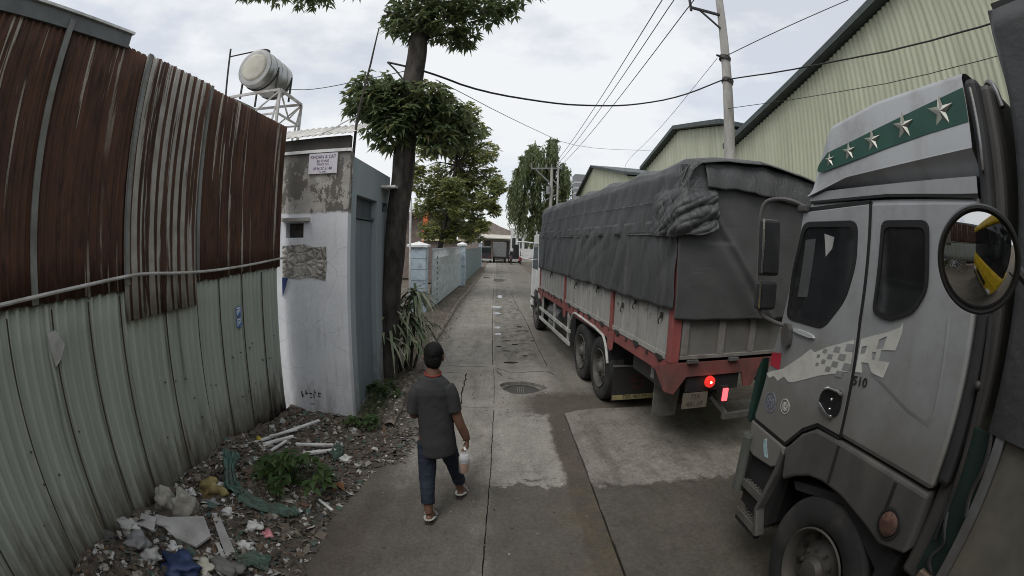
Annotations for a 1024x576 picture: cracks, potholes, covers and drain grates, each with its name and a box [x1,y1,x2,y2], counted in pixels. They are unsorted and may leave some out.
manhole cover [500,381,548,394]
crack [448,366,556,405]
